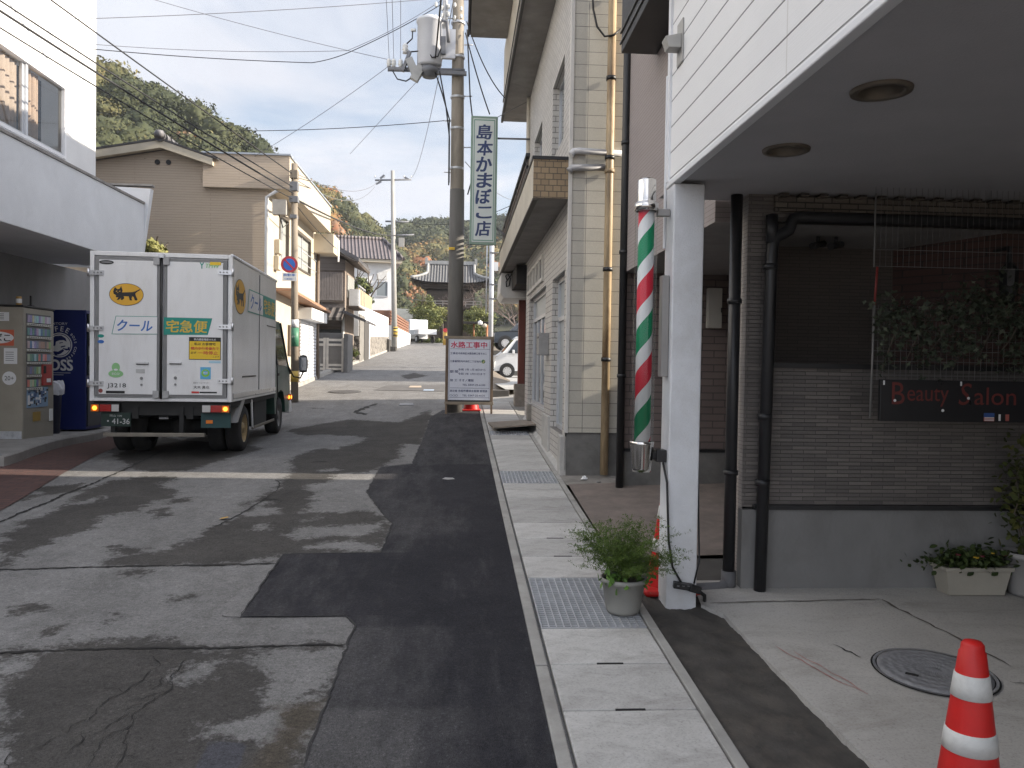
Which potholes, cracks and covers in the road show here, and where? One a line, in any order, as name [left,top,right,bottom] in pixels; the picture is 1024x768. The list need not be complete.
crack [212,480,281,528]
crack [0,643,344,768]
crack [354,404,376,415]
manhole cover [870,648,1002,697]
drain grate [499,471,559,486]
drain grate [528,578,647,632]
